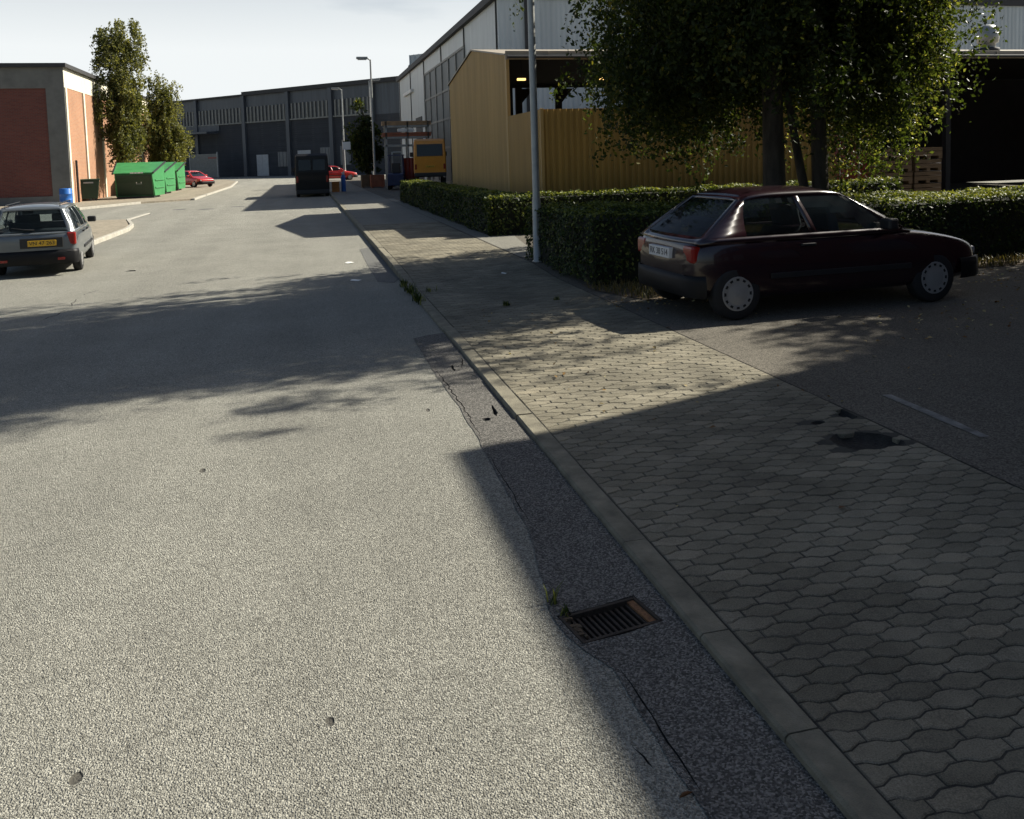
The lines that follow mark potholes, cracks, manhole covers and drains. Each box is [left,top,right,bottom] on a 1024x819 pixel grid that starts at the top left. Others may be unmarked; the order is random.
pothole [69,771,83,785]
crack [436,358,498,434]
pothole [829,432,906,450]
drain grate [557,595,663,684]
crack [619,668,701,791]
